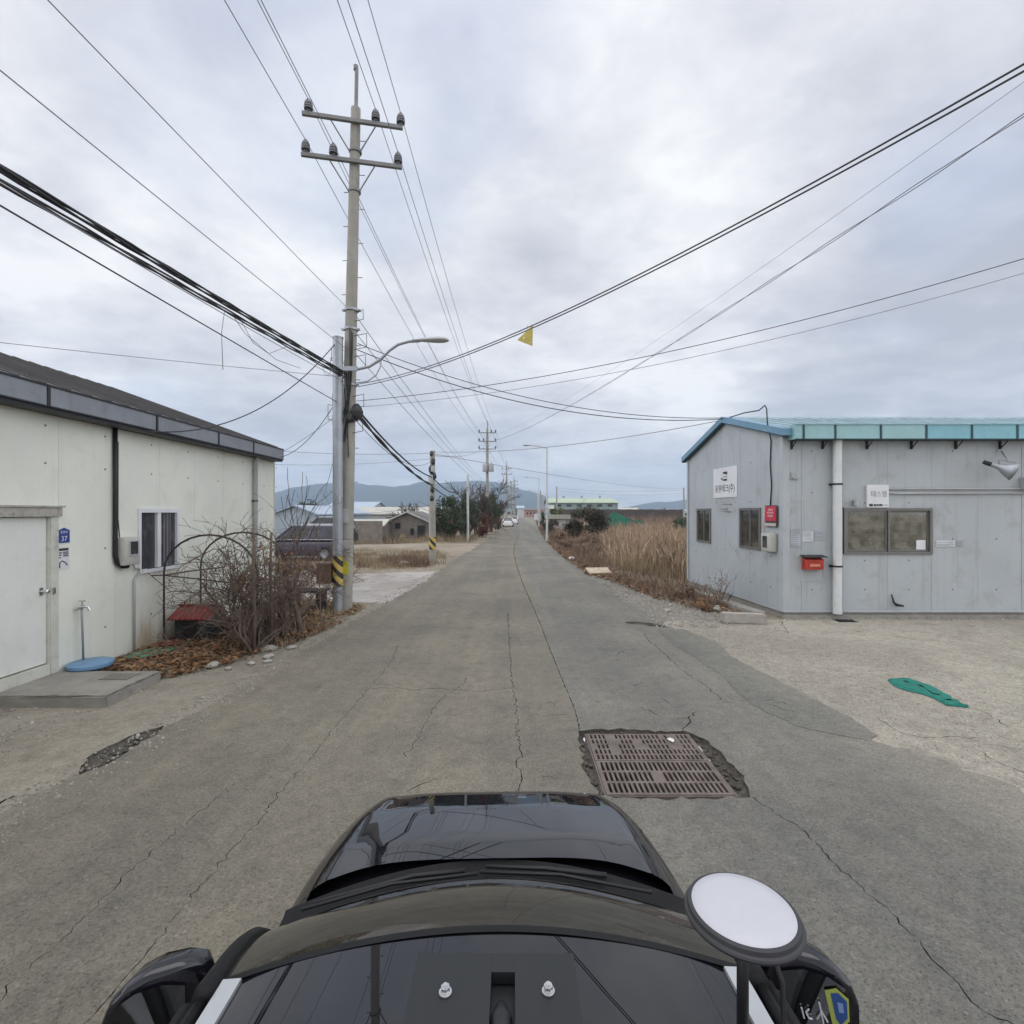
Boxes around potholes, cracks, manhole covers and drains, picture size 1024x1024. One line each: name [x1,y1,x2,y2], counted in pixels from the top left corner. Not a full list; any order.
pothole [79,725,164,775]
crack [749,796,1013,1024]
crack [371,613,523,791]
crack [878,708,1024,773]
crack [0,783,235,1002]
drain grate [585,734,738,800]
crack [84,646,398,1024]
